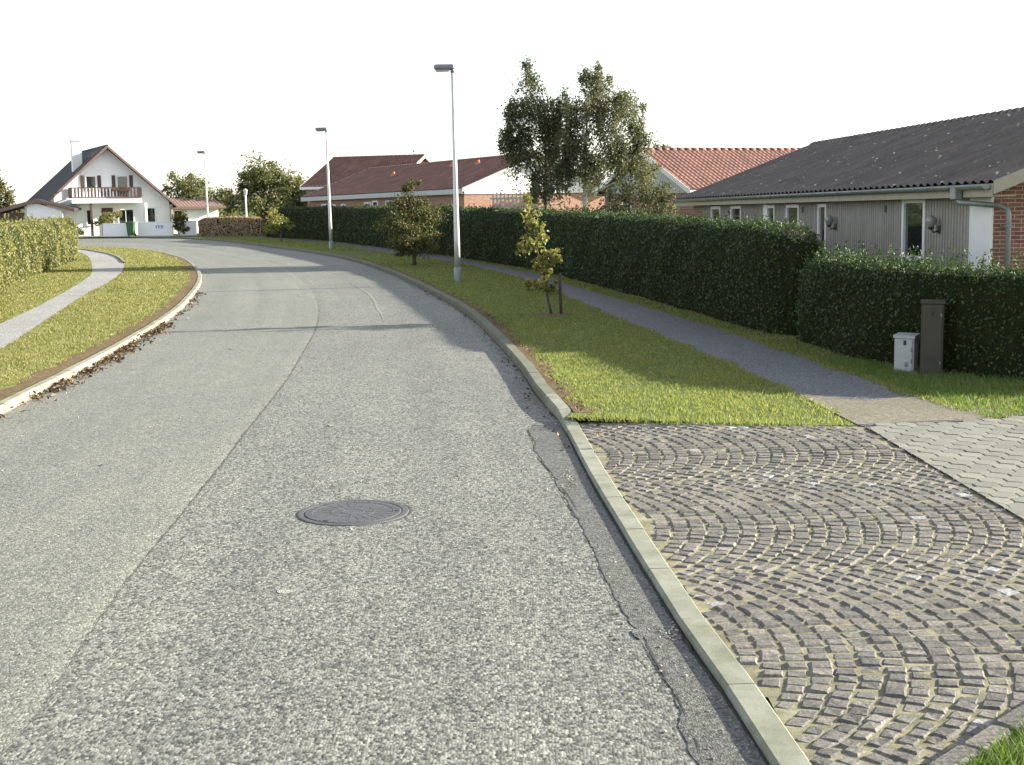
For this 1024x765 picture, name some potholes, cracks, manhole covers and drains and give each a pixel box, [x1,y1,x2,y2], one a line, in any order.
manhole cover [297,500,409,526]
crack [528,429,578,518]
crack [644,640,701,757]
